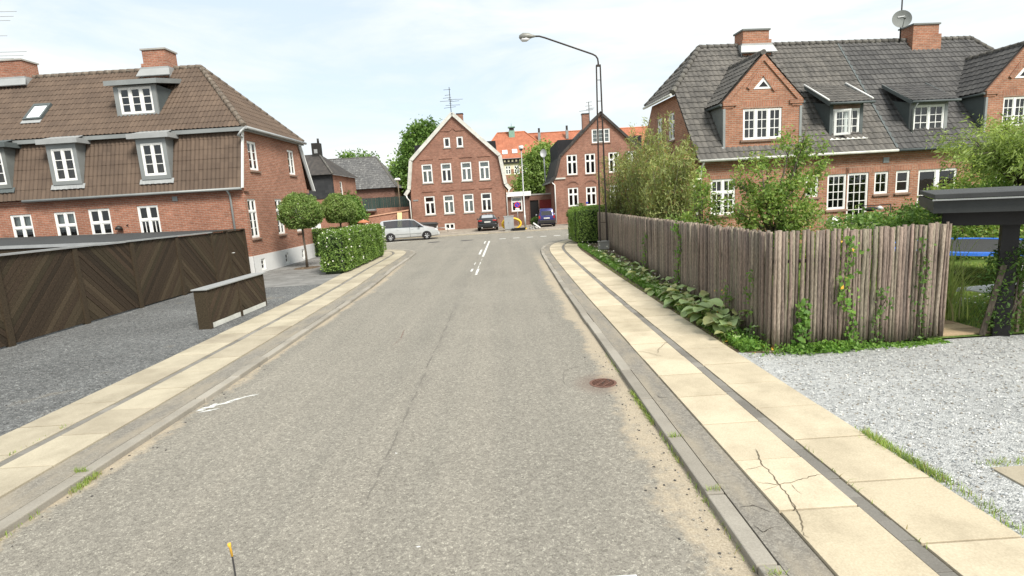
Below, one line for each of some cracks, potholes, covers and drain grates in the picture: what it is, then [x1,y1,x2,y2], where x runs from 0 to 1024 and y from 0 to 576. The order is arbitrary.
crack [742,450,818,533]
crack [366,313,452,501]
